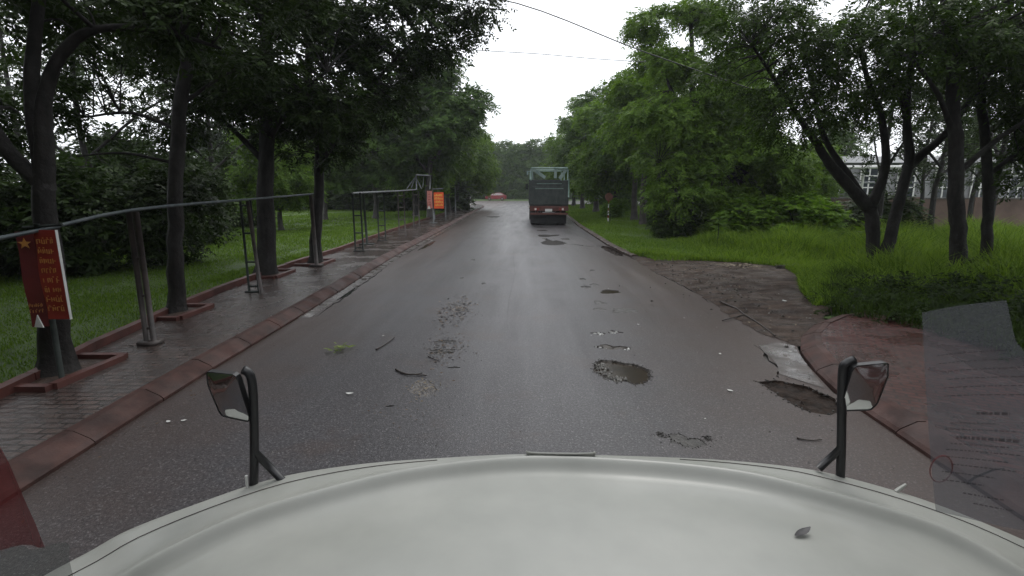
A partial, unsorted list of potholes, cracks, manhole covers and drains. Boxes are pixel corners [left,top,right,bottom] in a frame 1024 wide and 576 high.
pothole [593,360,651,385]
pothole [760,380,837,415]
pothole [667,434,707,448]
